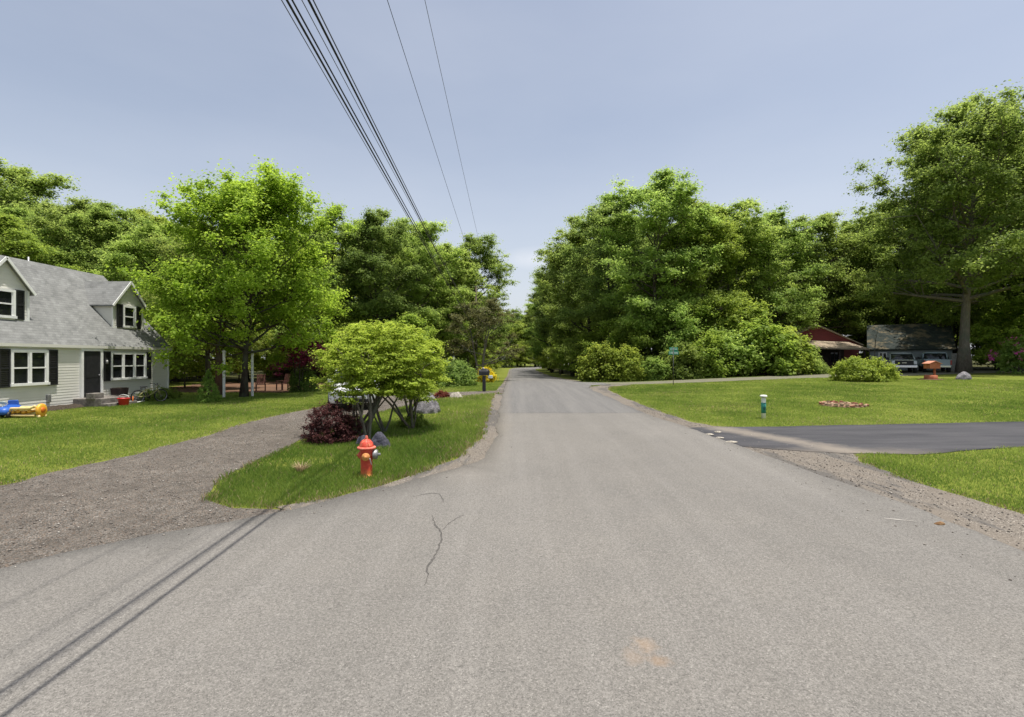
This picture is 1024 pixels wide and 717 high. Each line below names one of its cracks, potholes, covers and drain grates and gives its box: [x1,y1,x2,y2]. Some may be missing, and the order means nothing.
crack [413,493,458,585]
